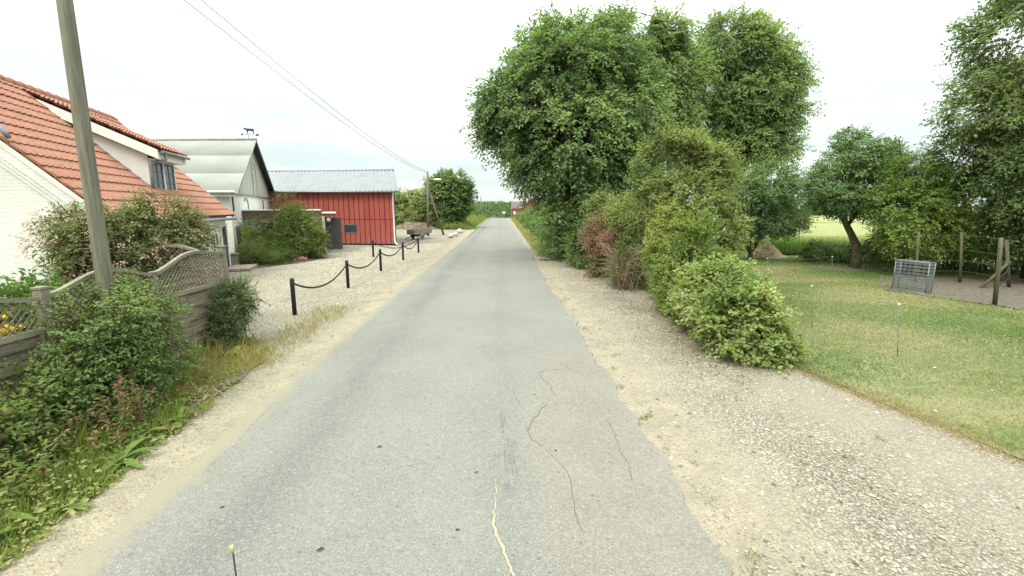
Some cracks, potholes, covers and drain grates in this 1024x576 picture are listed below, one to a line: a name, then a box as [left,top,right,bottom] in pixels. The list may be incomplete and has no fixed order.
crack [514,365,587,532]
crack [491,453,516,576]
